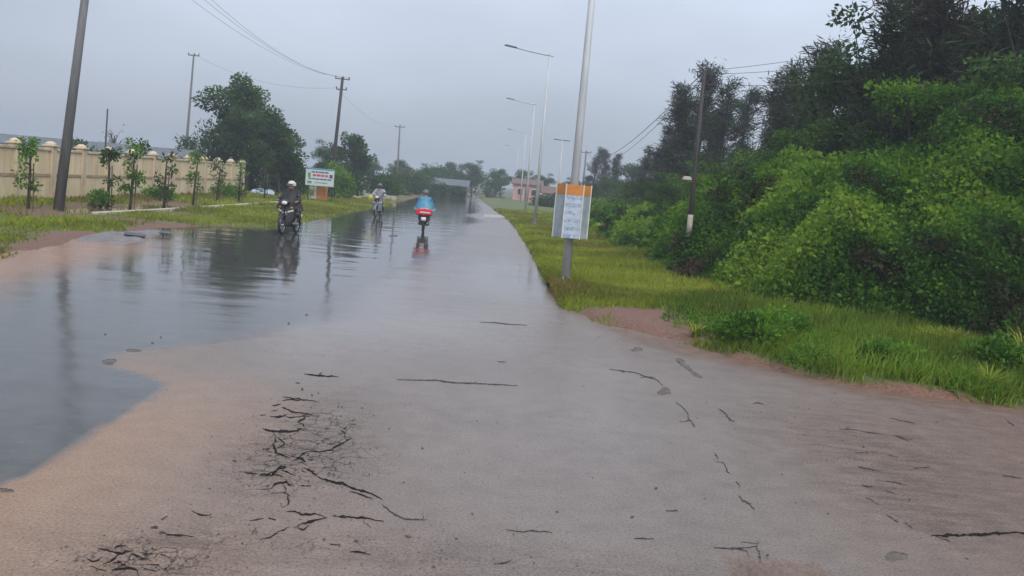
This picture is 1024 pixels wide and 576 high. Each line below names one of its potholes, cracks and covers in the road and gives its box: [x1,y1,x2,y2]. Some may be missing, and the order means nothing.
crack [88,516,194,575]
crack [398,378,518,386]
crack [240,373,427,539]
pothole [885,551,908,562]
